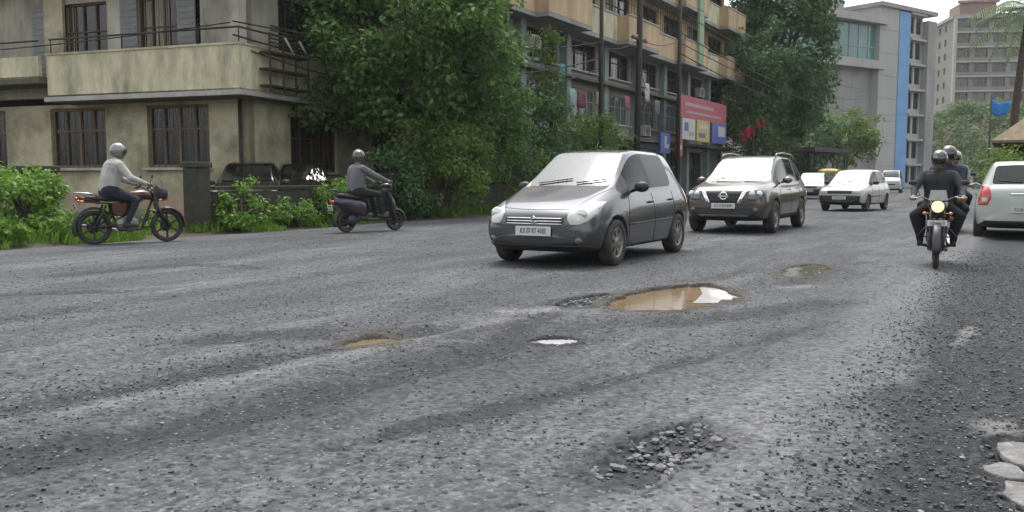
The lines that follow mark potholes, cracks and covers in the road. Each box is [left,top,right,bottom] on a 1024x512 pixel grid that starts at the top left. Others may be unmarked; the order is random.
pothole [772,263,841,279]
pothole [517,335,587,347]
pothole [595,283,750,313]
pothole [331,331,415,350]
pothole [579,419,739,496]
